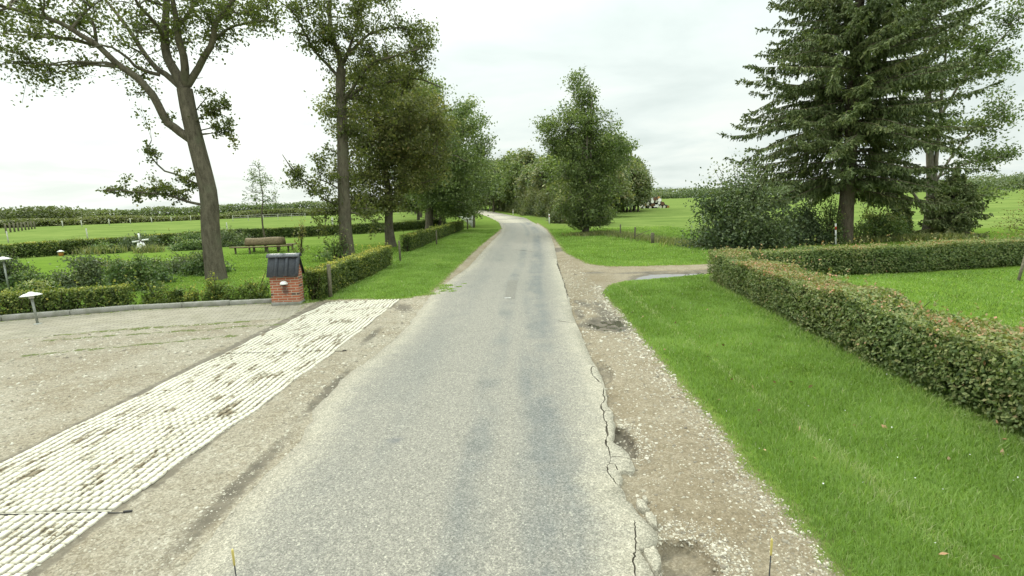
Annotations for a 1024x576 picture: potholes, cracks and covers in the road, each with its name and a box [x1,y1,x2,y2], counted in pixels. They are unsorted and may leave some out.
pothole [613,428,639,459]
pothole [657,539,723,576]
crack [591,366,631,485]
